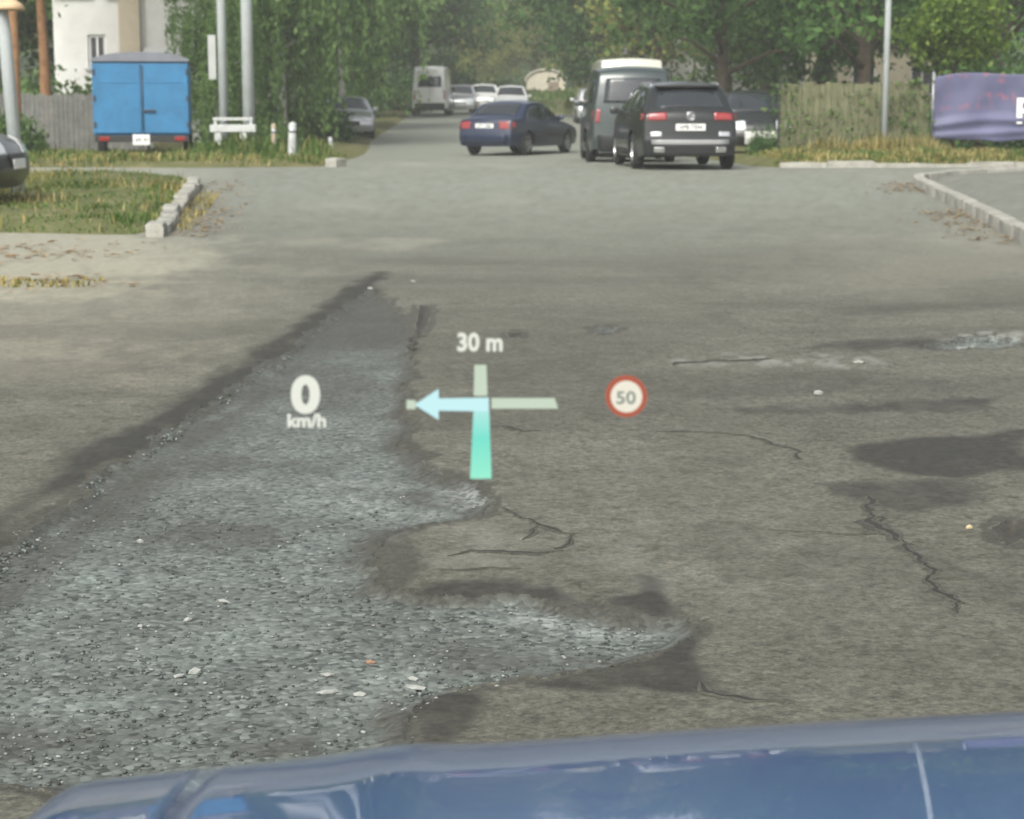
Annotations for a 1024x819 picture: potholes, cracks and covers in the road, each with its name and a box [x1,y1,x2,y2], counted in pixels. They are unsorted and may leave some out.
crack [440,507,575,571]
crack [655,430,803,459]
pothole [924,335,1020,350]
crack [697,680,785,703]
crack [768,493,966,613]
pothole [0,290,699,797]
